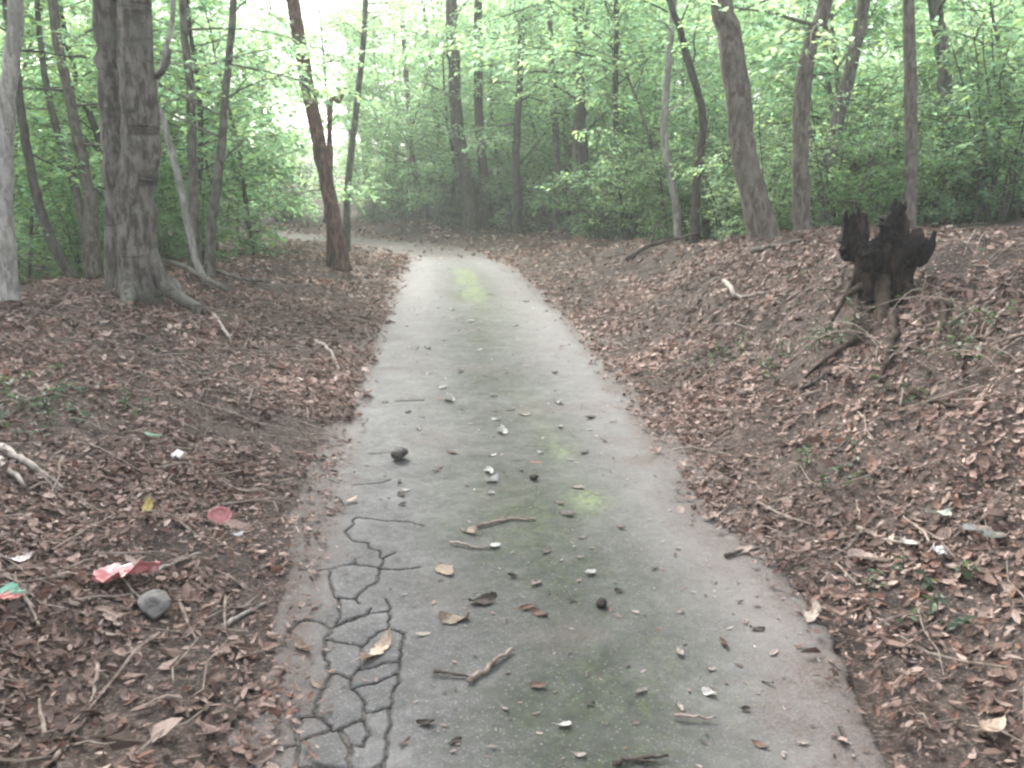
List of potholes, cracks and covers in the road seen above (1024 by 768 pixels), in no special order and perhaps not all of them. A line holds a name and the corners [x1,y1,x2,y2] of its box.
crack [256,517,424,768]
